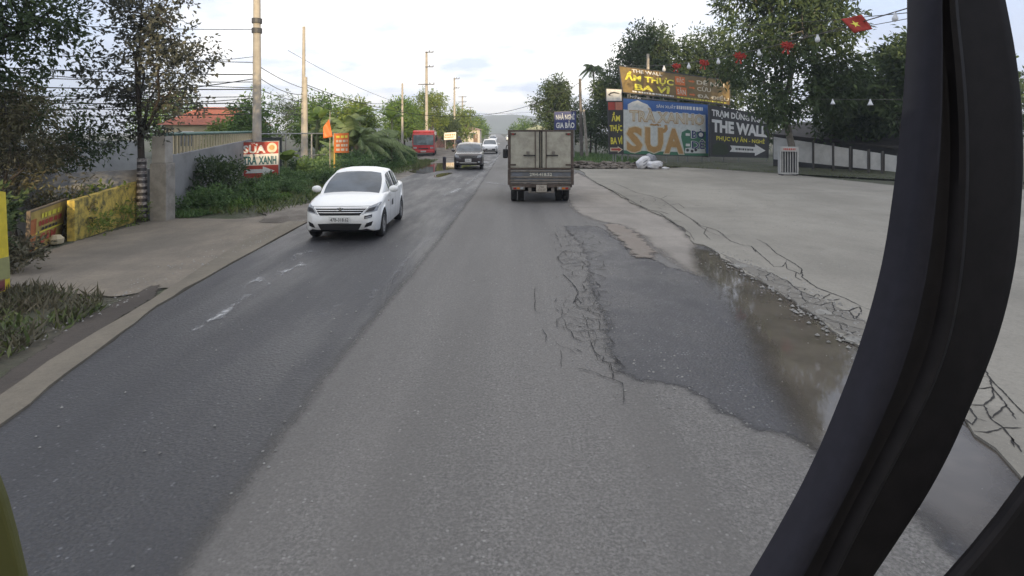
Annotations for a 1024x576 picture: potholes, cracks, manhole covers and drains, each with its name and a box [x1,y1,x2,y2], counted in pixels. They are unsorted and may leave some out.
crack [617,184,714,234]
crack [965,371,1024,452]
crack [724,236,868,336]
crack [534,230,626,403]
